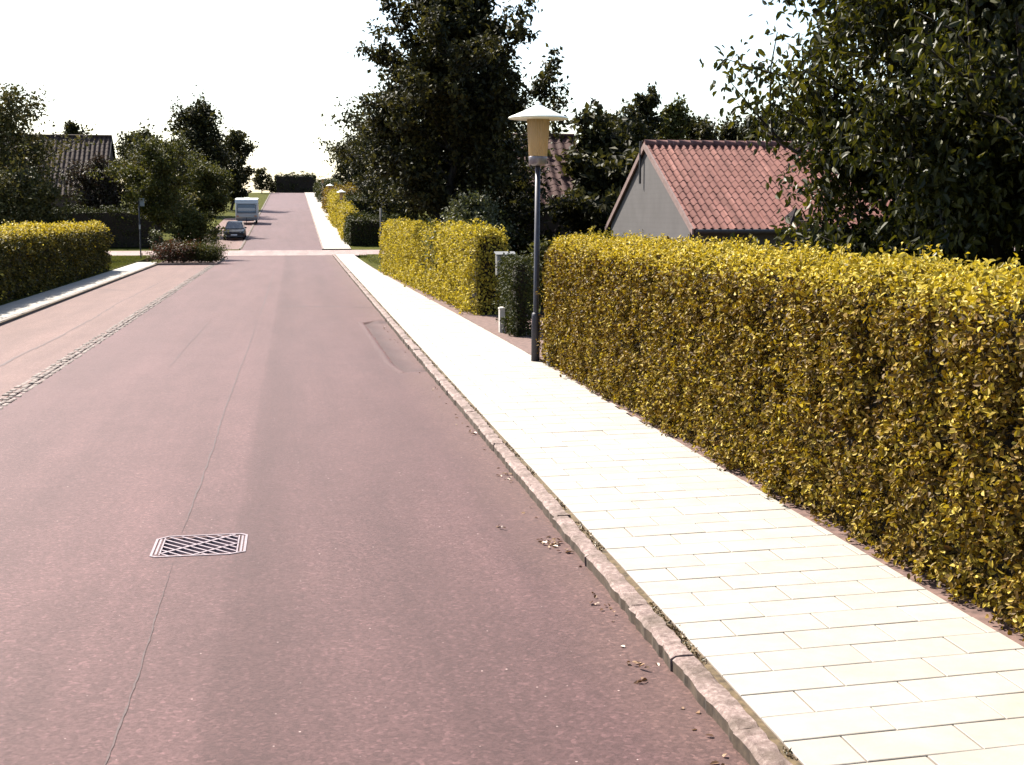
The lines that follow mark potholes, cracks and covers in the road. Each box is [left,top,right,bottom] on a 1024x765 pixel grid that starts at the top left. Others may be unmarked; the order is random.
crack [104,567,172,765]
